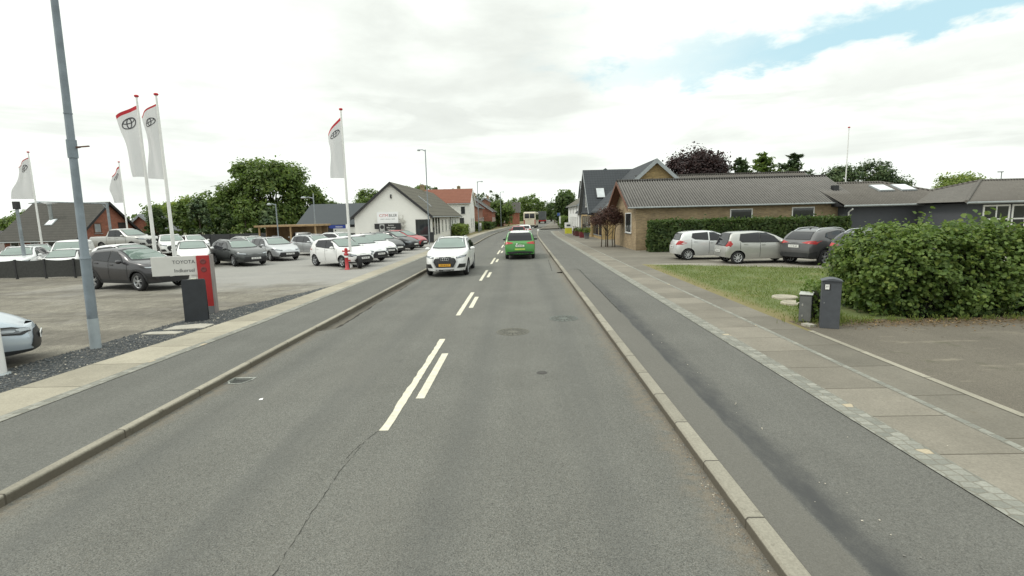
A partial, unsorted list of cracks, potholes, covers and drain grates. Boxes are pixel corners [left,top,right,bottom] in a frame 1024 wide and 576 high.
crack [272,430,379,576]
